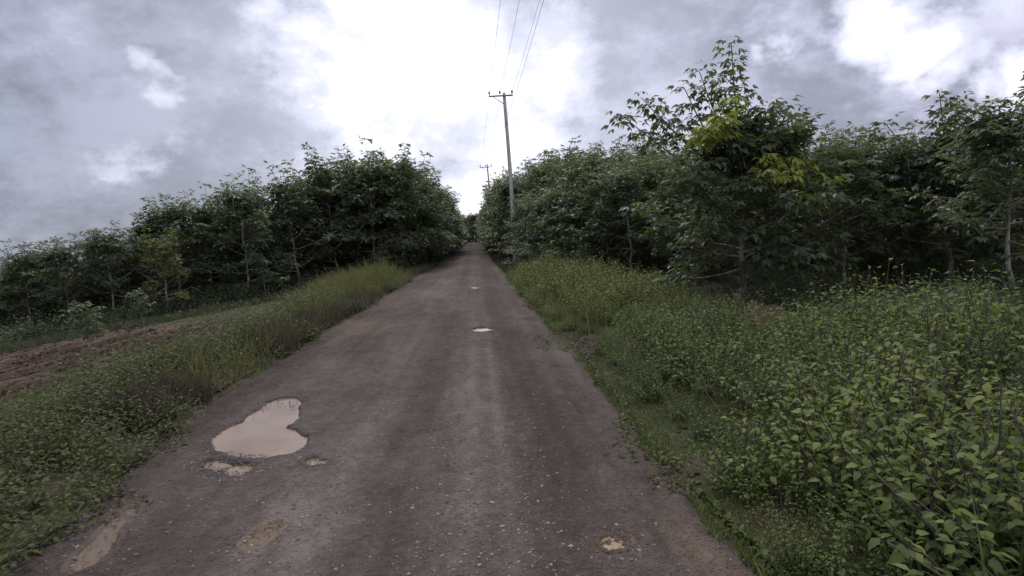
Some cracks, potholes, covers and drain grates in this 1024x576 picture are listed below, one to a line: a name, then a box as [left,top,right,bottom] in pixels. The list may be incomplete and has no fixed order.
pothole [234,517,291,555]
pothole [594,531,639,555]
pothole [193,396,317,479]
pothole [296,454,333,468]
pothole [56,501,147,576]
